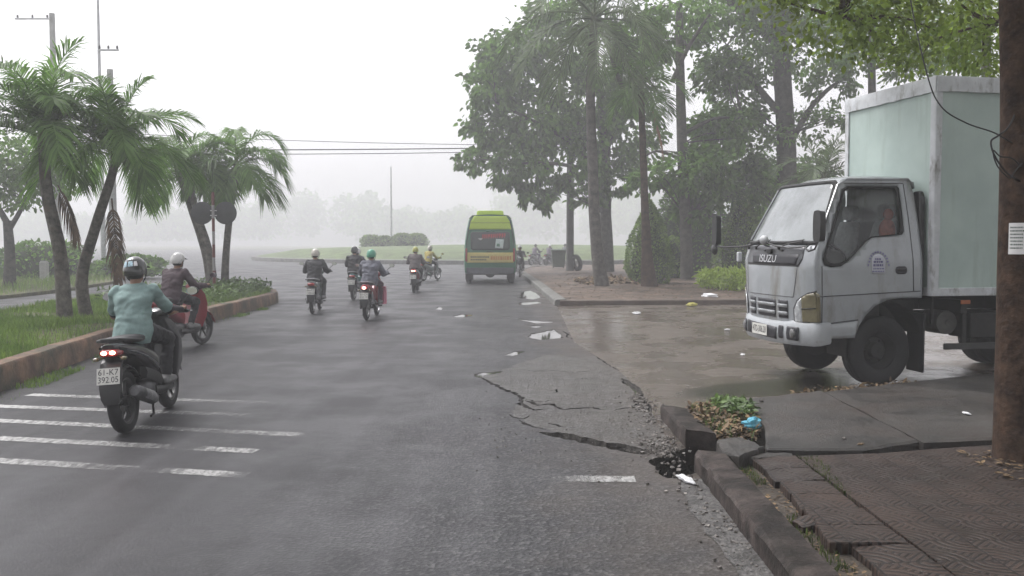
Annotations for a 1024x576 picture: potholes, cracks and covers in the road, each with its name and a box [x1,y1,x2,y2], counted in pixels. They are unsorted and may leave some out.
pothole [649,447,716,478]
crack [482,357,652,430]
